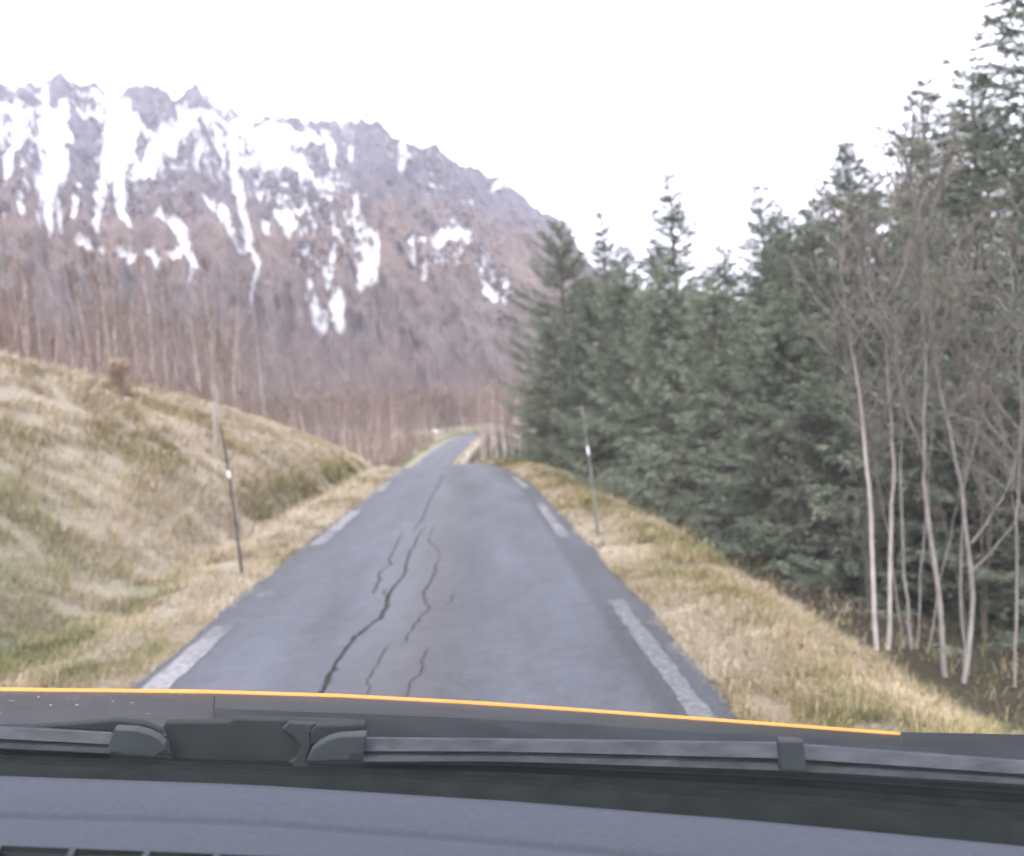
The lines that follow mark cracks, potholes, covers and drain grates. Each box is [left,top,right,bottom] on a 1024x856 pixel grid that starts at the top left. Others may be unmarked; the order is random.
crack [318,472,454,697]
